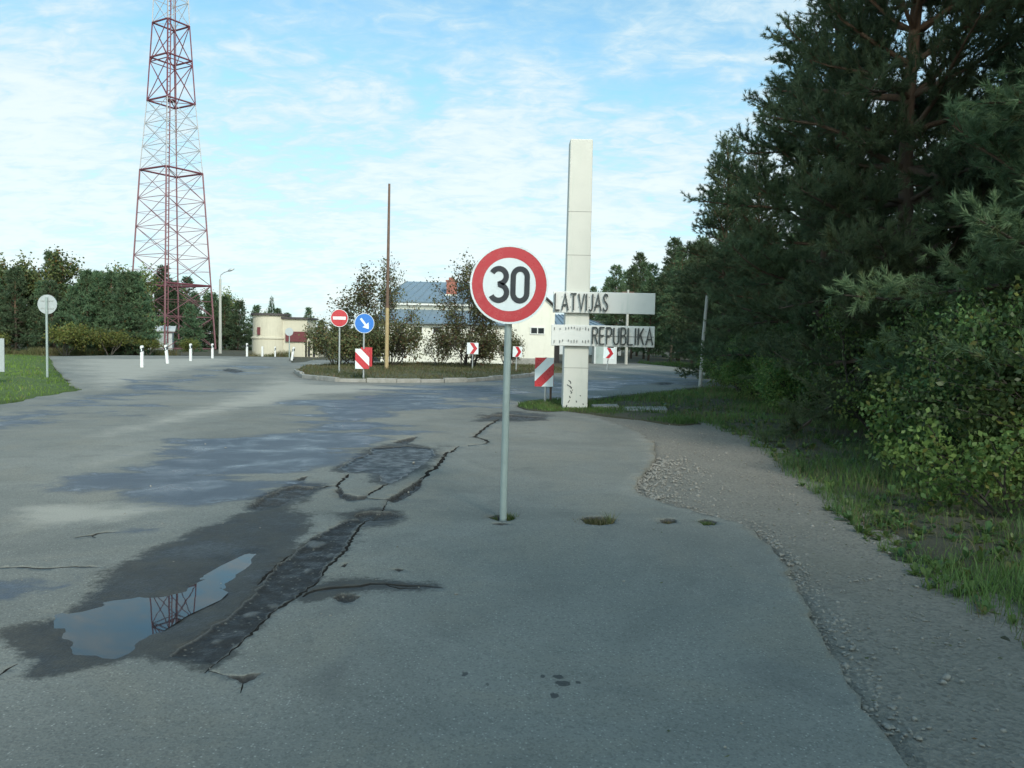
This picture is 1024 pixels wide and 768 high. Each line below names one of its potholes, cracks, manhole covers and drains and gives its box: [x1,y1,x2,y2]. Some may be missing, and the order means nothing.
crack [205,419,499,675]
